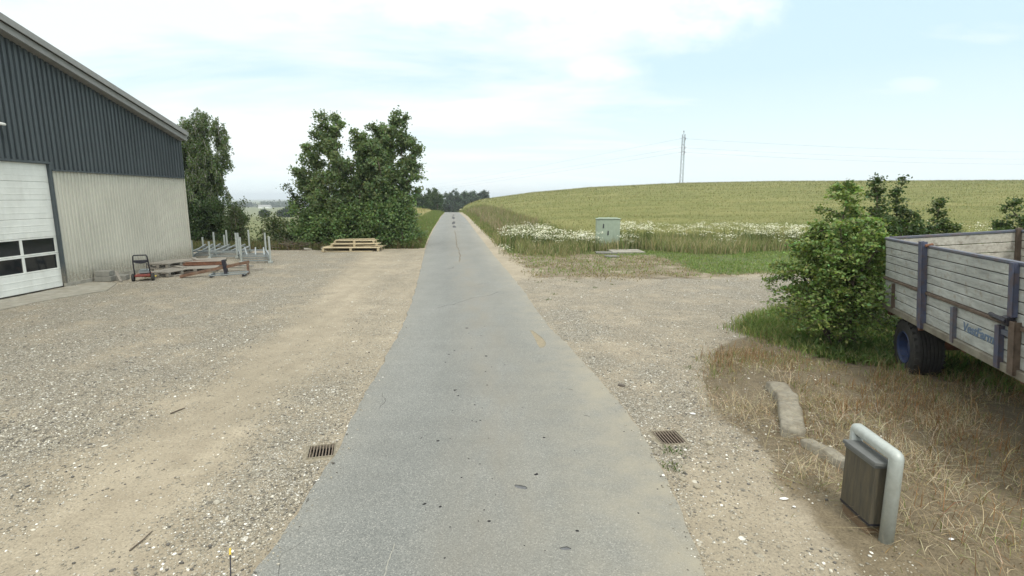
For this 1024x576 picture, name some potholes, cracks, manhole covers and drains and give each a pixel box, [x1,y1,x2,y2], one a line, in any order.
drain grate [302,443,340,462]
drain grate [647,429,691,448]
